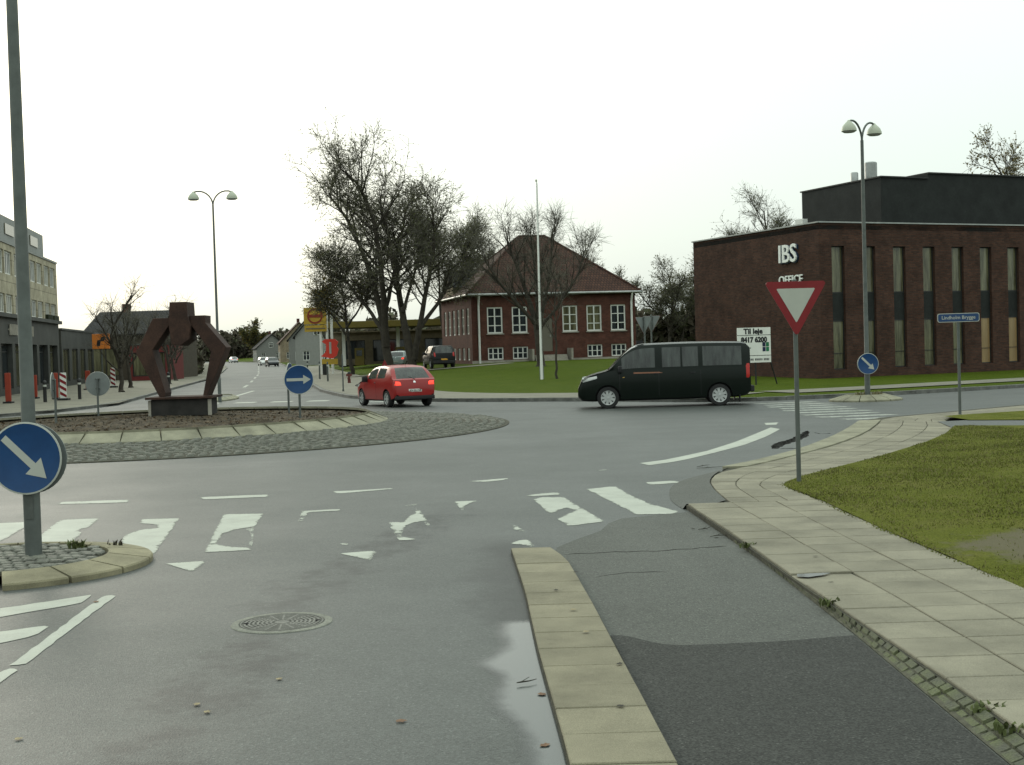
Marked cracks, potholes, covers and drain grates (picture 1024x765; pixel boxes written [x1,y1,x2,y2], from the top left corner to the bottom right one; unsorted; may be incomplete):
crack [565,546,723,555]
manhole cover [230,612,333,634]
